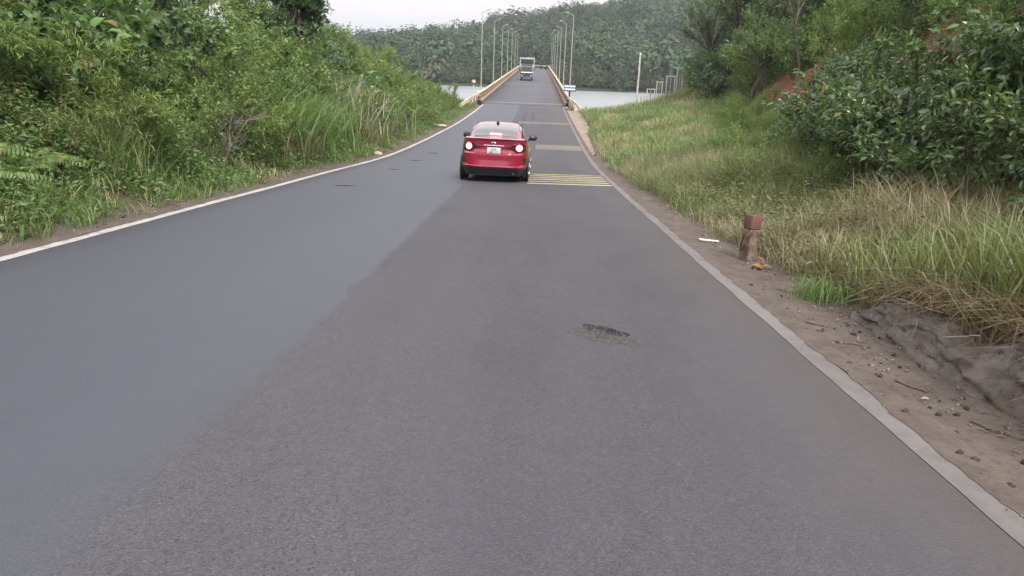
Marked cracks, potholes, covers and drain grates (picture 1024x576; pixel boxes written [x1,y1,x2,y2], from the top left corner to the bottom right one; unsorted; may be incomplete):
pothole [566,323,641,349]
